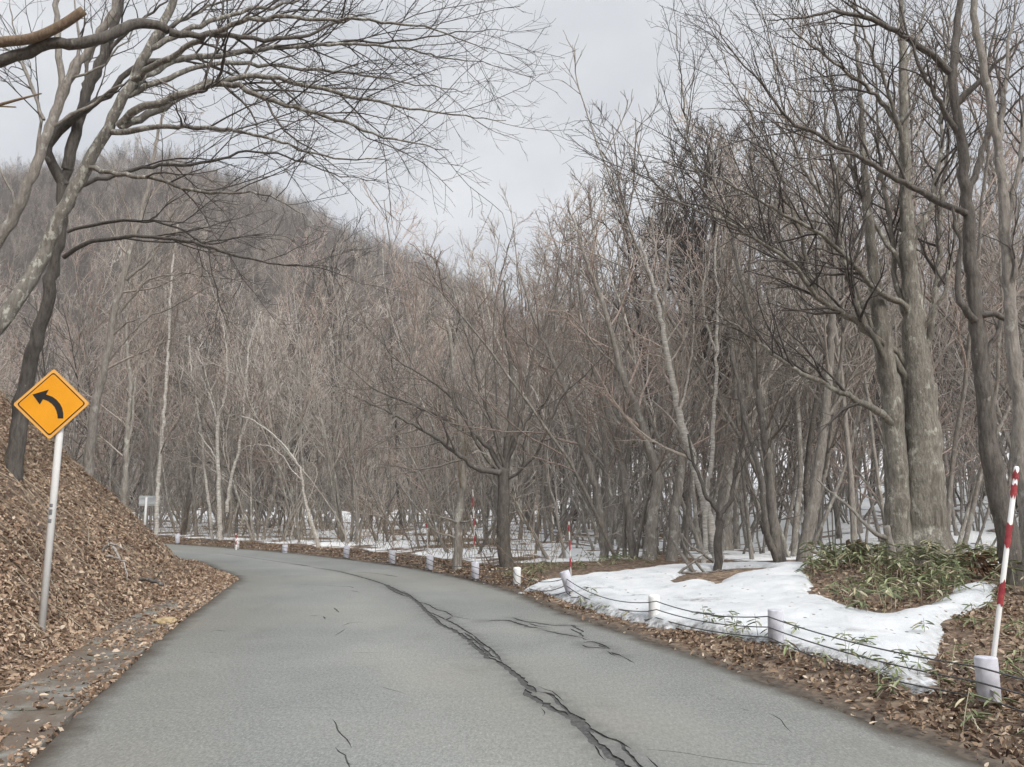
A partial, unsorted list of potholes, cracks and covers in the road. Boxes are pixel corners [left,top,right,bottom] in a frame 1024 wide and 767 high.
crack [230,554,778,767]
